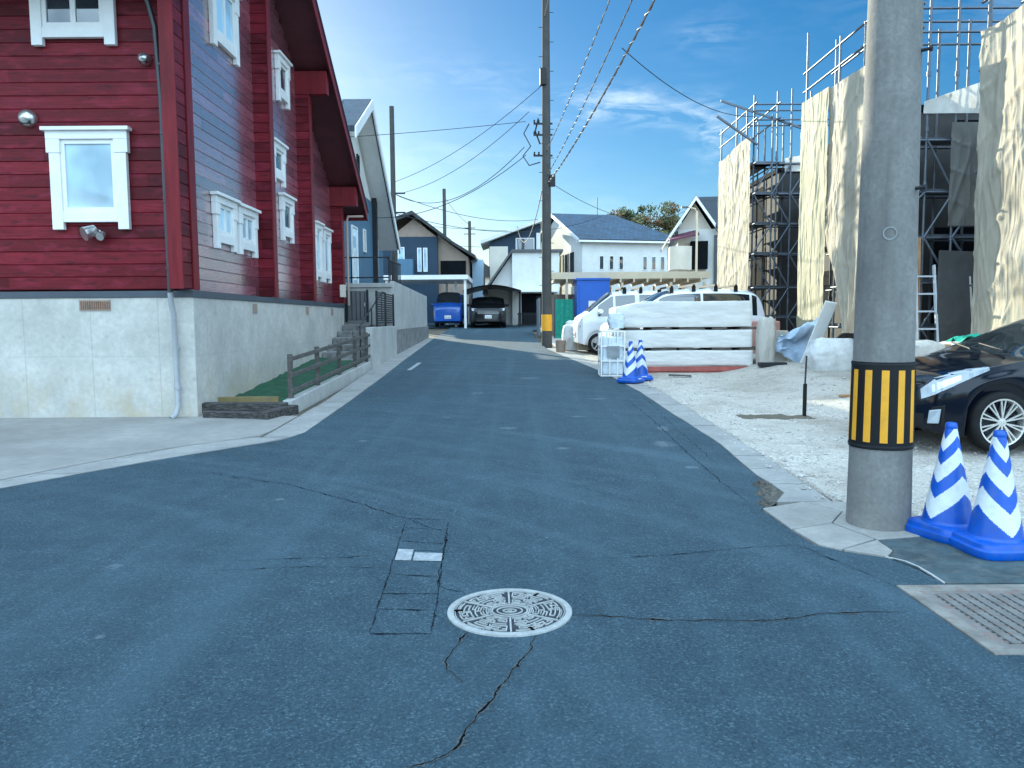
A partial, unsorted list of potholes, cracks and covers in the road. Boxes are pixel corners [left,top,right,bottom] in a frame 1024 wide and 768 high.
crack [618,546,900,588]
crack [409,632,535,768]
crack [212,472,460,592]
manhole cover [447,588,572,637]
pothole [753,480,784,508]
drain grate [896,584,1024,655]
crack [572,611,898,622]
